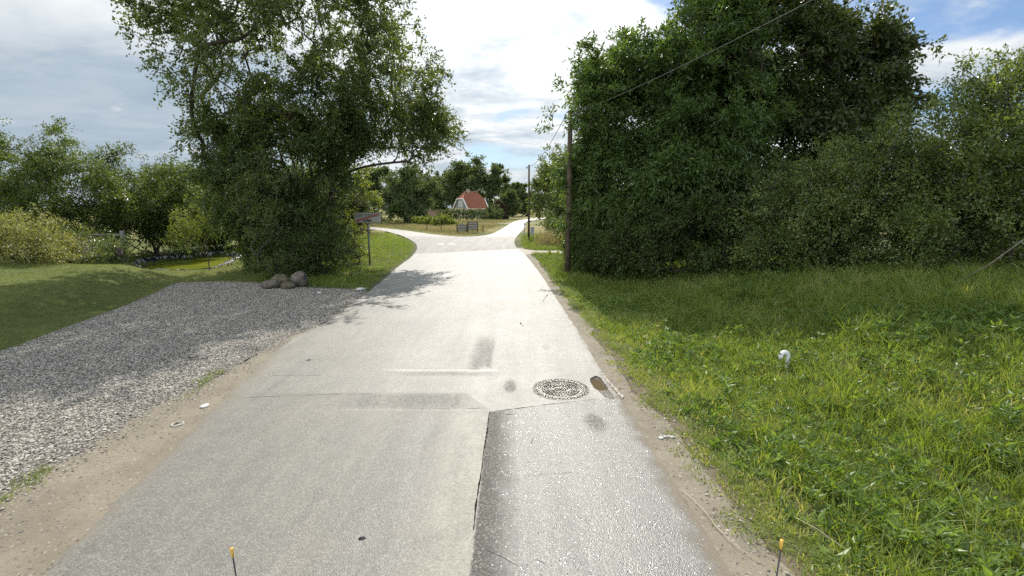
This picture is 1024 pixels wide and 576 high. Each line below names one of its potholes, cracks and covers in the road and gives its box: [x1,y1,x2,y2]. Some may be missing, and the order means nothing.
pothole [590,373,624,400]
manhole cover [532,379,589,400]
